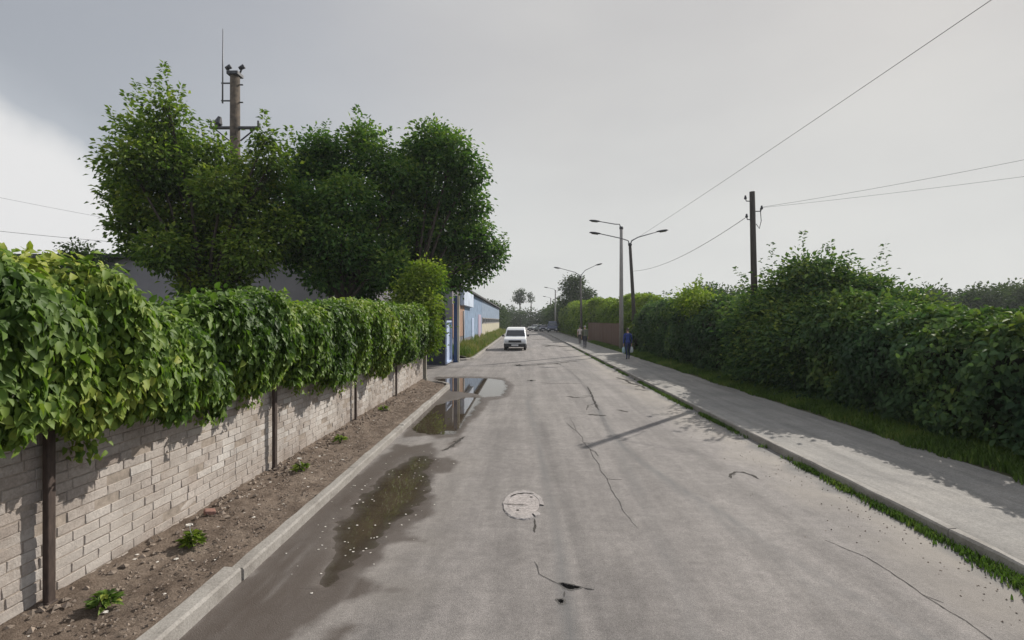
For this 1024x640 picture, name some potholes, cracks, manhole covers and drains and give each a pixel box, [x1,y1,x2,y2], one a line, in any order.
manhole cover [502,490,544,520]
crack [826,540,992,640]
crack [567,383,636,526]
